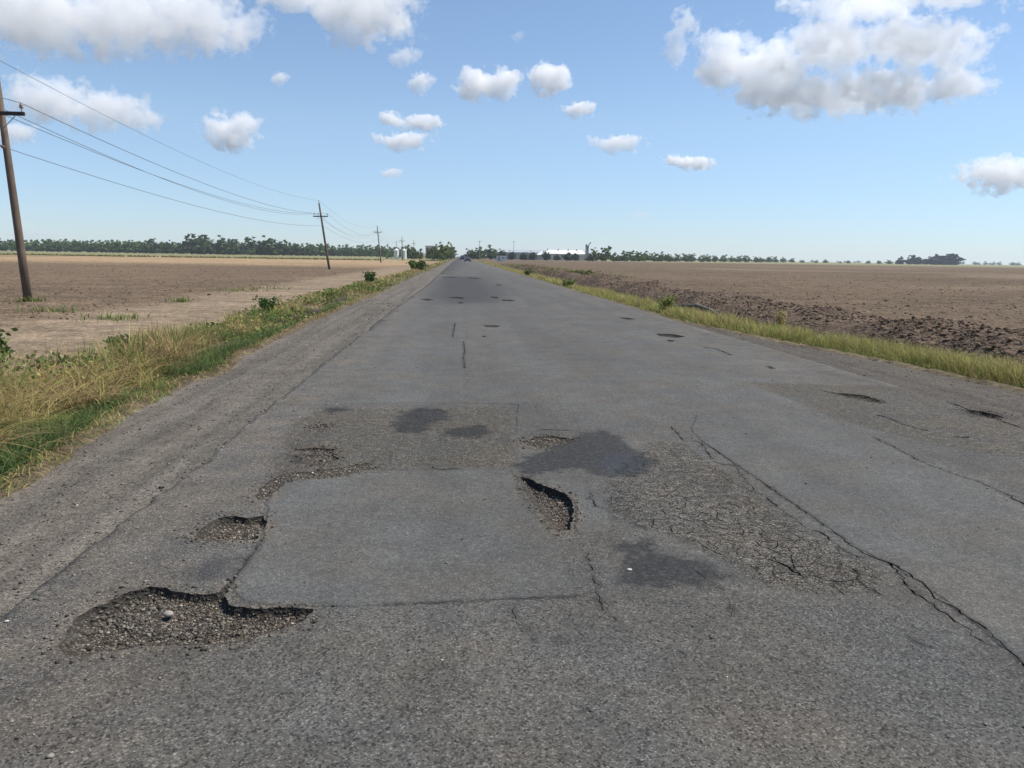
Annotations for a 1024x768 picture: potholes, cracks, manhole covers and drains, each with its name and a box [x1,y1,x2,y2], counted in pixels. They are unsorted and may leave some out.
crack [611,427,1024,666]
pothole [194,516,267,541]
pothole [518,476,574,532]
pothole [964,409,1004,418]
pothole [256,462,375,499]
pothole [295,447,340,466]
crack [386,553,617,632]
pothole [835,393,881,403]
pothole [55,584,313,656]
